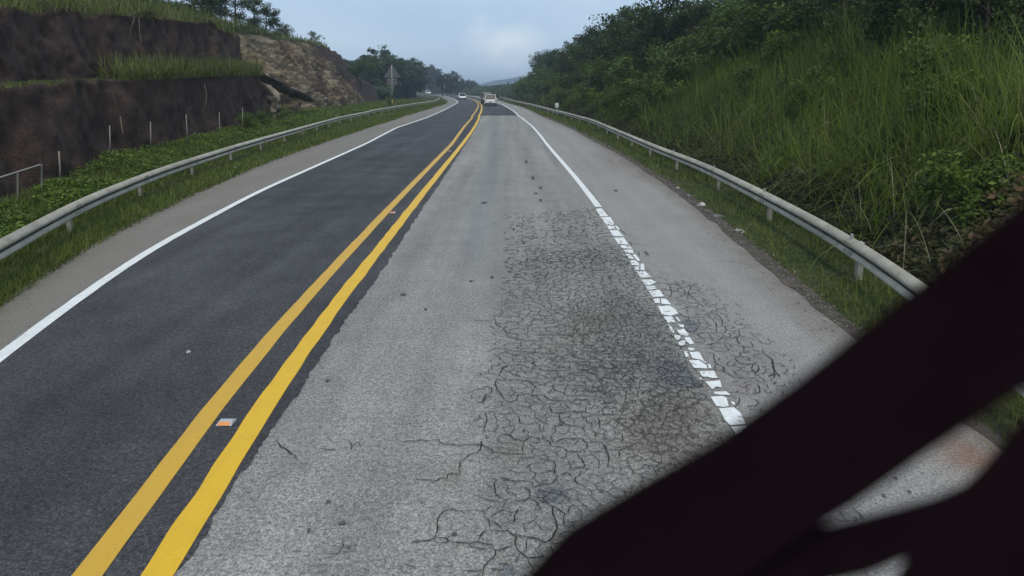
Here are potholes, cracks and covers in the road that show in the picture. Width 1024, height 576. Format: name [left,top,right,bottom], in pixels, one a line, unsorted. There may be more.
crack [399,208,832,576]
